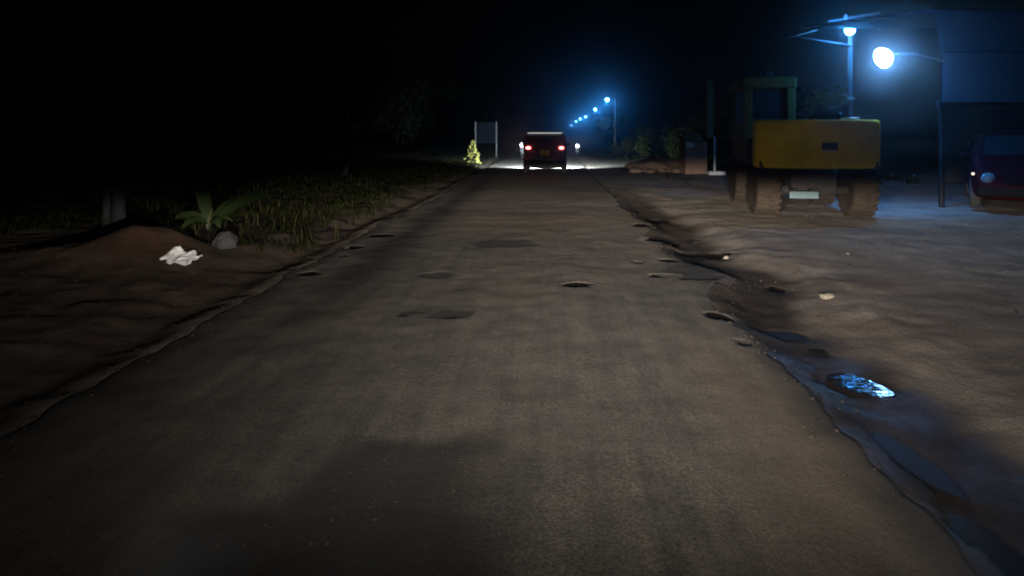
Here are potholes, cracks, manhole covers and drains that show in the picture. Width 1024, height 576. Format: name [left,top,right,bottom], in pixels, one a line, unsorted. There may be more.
pothole [405,306,490,323]
pothole [550,280,604,290]
pothole [690,308,750,328]
pothole [639,272,683,280]
pothole [407,269,466,281]
pothole [286,268,332,278]
pothole [651,263,738,286]
